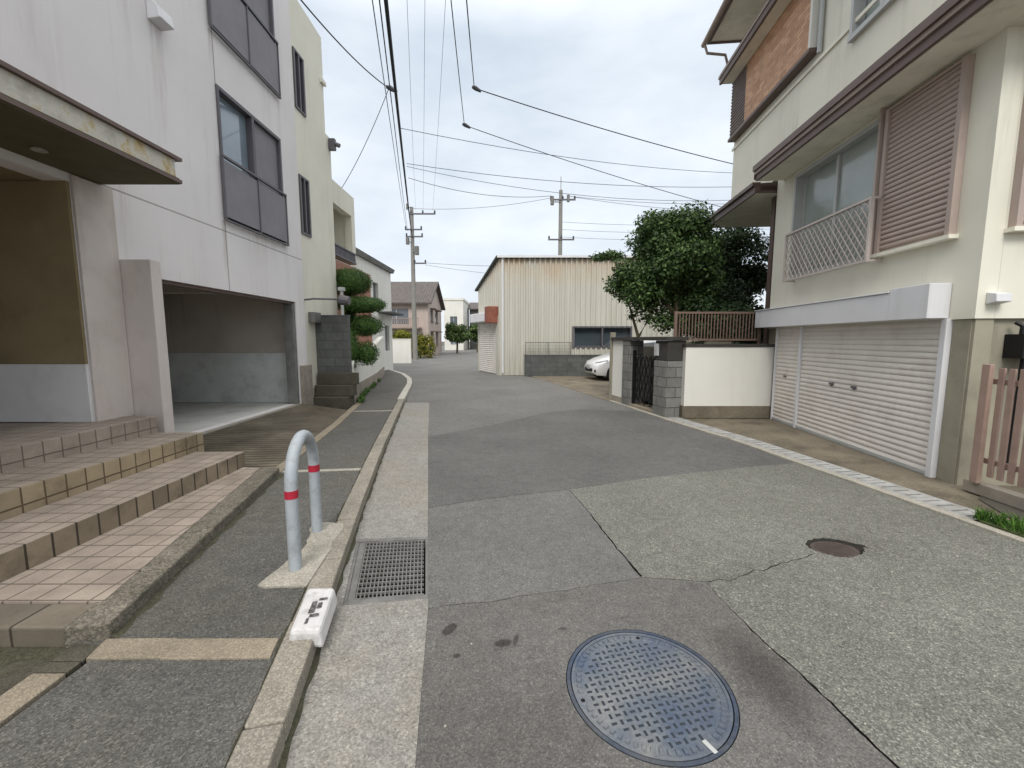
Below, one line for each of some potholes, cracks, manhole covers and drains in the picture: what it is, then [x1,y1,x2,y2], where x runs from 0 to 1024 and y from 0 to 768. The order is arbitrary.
crack [428,491,900,768]
manhole cover [805,538,868,558]
drain grate [343,537,428,605]
manhole cover [567,630,739,768]
